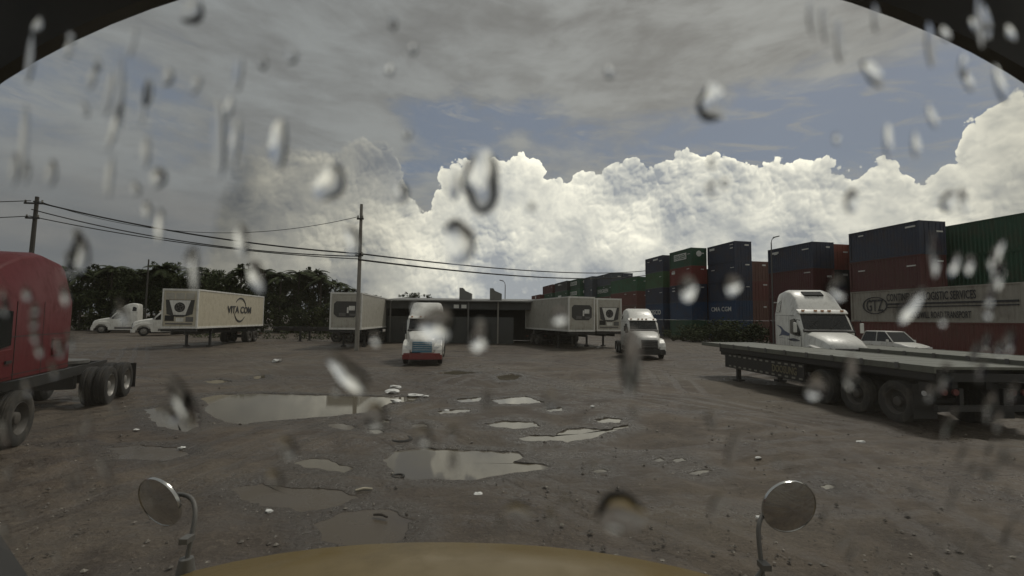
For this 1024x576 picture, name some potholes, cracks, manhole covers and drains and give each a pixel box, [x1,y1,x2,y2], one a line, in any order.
pothole [491,396,544,404]
pothole [381,447,551,480]
pothole [294,458,353,473]
pothole [144,406,201,432]
pothole [484,420,541,429]
pothole [230,483,360,512]
pothole [198,393,420,425]
pothole [313,509,412,546]
pothole [518,425,630,442]
pothole [107,445,189,461]
